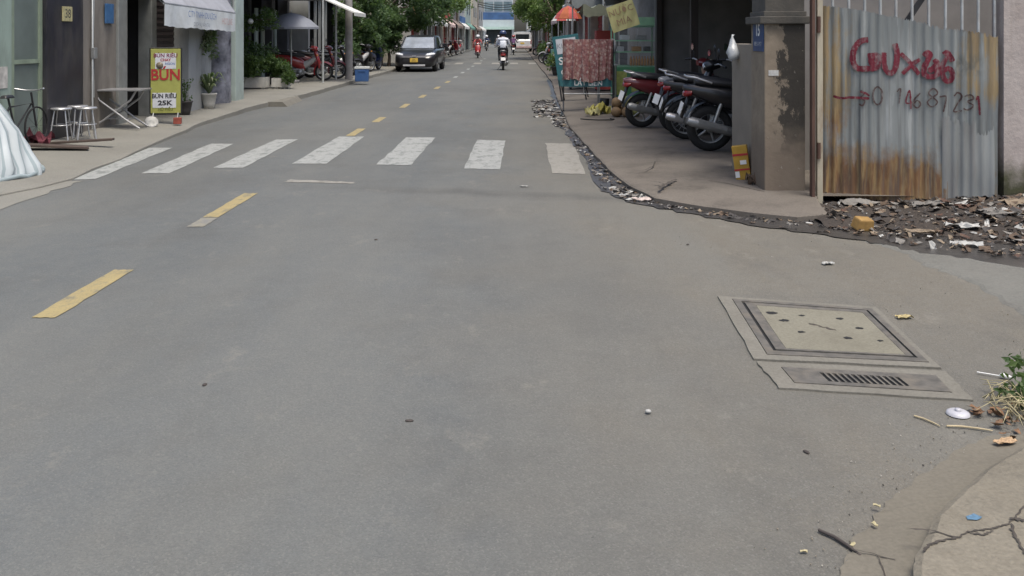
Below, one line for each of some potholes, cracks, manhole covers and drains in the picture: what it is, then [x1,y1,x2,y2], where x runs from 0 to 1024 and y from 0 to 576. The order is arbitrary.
drain grate [757,361,973,402]
crack [910,506,1024,553]
manhole cover [718,296,941,370]
